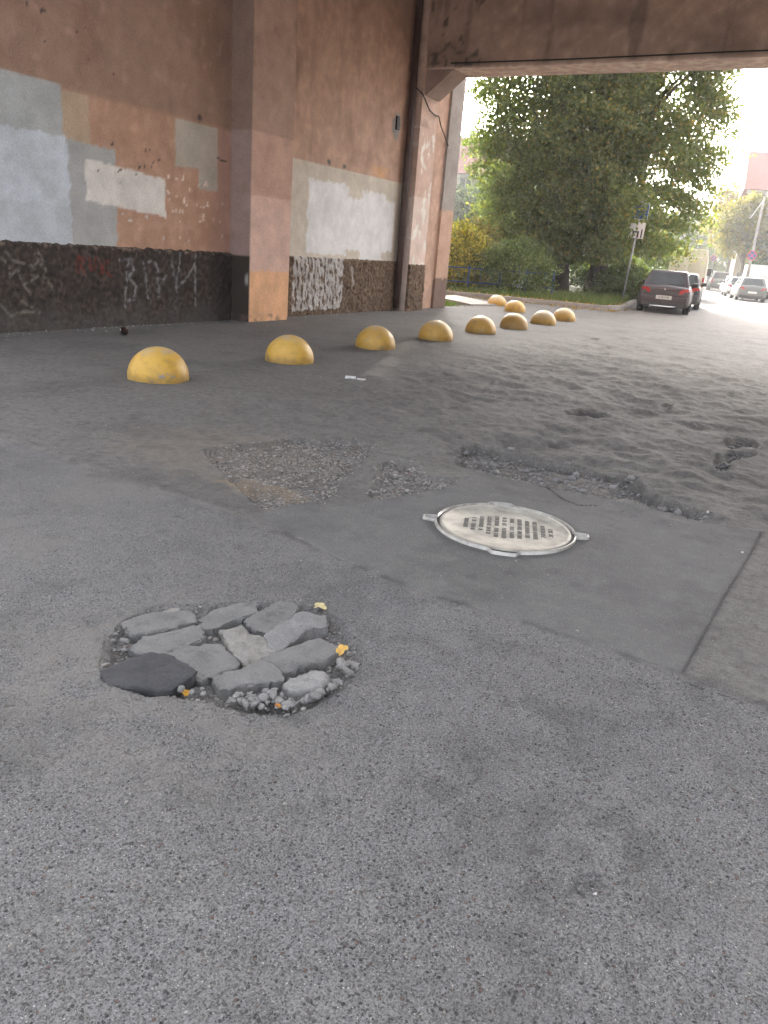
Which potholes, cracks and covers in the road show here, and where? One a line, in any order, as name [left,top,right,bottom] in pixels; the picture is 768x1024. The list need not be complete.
pothole [712,450,757,472]
pothole [562,408,611,418]
crack [546,487,596,506]
pothole [98,604,363,718]
pothole [723,437,762,450]
pothole [451,444,712,521]
manhole cover [422,501,589,557]
pothole [368,459,459,500]
pothole [204,439,383,509]
